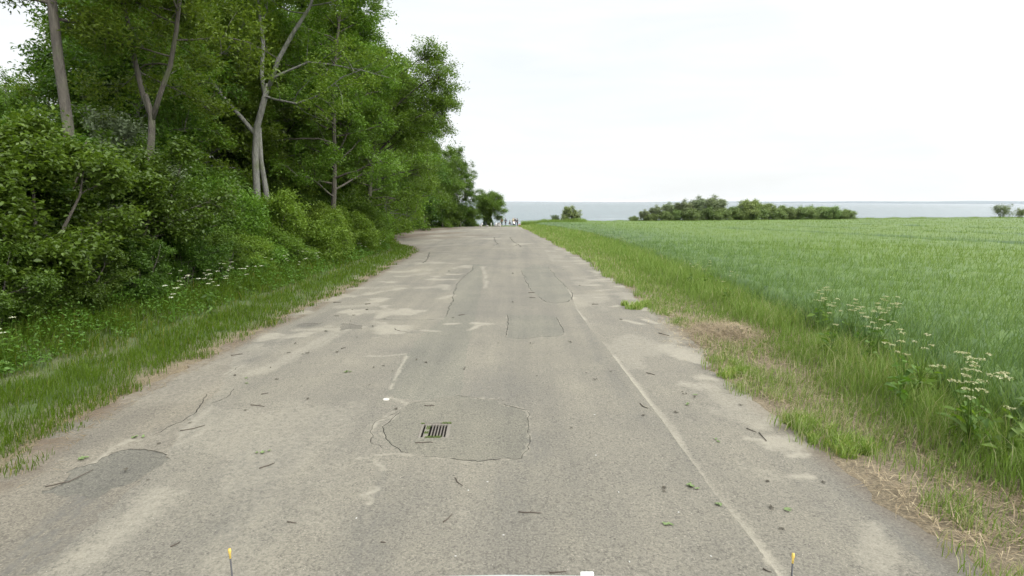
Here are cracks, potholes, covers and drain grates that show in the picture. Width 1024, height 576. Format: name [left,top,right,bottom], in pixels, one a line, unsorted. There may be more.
drain grate [417,421,452,457]
crack [154,365,241,435]
